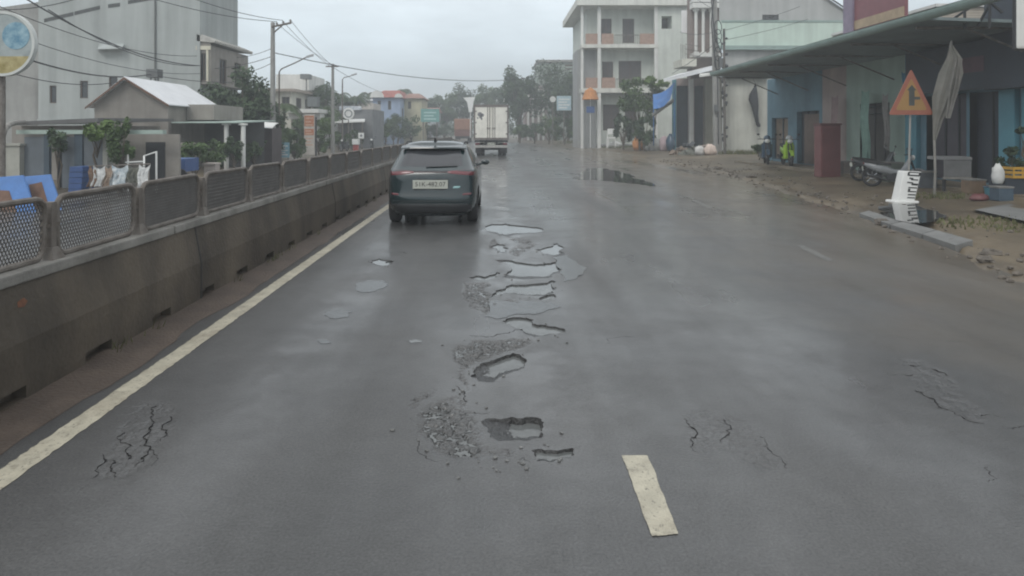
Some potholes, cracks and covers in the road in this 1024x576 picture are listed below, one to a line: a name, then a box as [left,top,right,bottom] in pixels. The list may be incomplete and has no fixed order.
pothole [482,417,544,441]
pothole [469,272,500,280]
crack [890,341,1024,429]
pothole [503,317,565,337]
pothole [496,260,561,279]
pothole [471,353,527,382]
pothole [537,243,564,257]
crack [679,408,793,475]
pothole [485,224,543,237]
pothole [491,280,556,297]
pothole [531,448,574,462]
crack [85,398,182,485]
